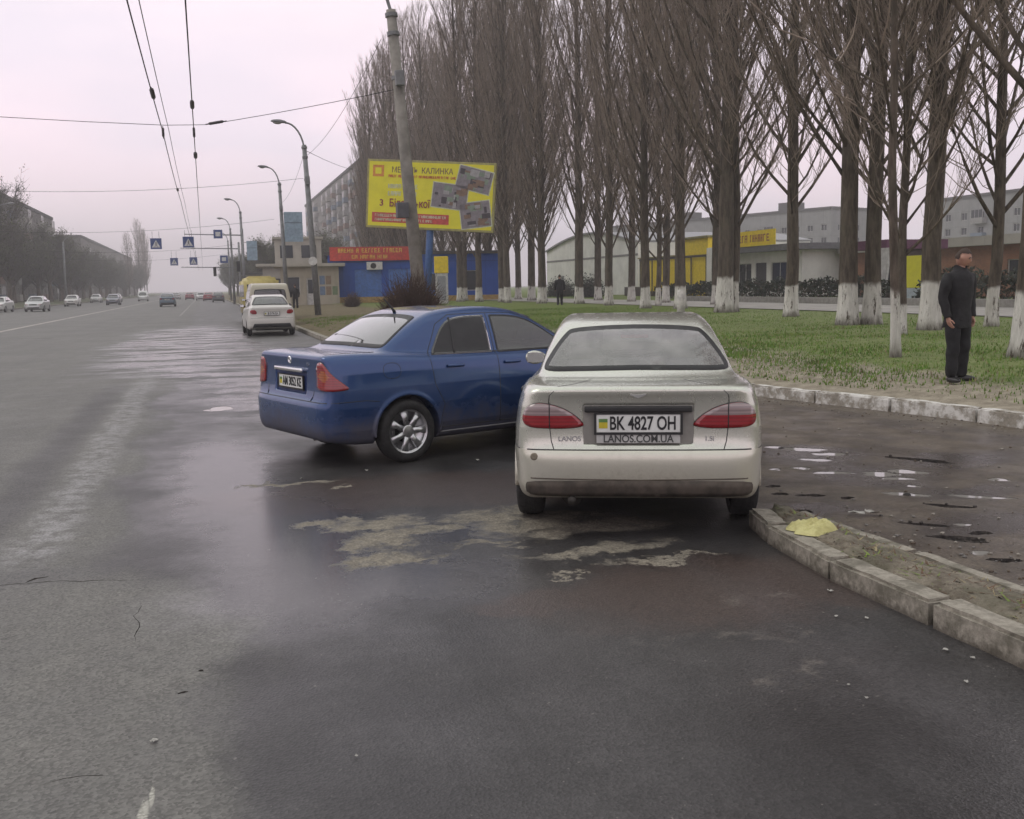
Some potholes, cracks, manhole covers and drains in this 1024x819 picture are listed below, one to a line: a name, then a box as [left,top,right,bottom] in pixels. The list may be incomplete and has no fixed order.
pothole [925,535,990,543]
pothole [885,455,957,464]
crack [6,576,154,585]
